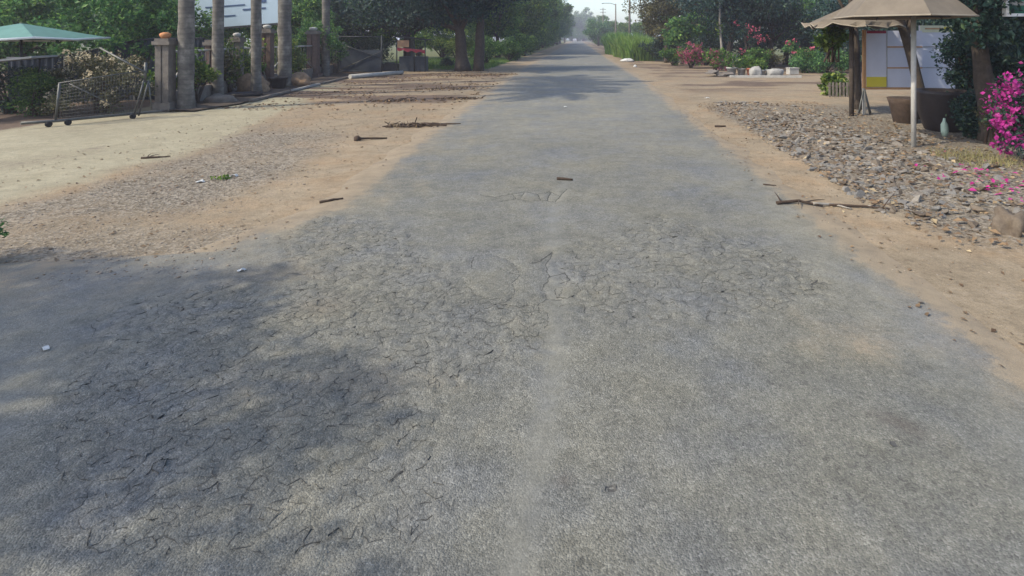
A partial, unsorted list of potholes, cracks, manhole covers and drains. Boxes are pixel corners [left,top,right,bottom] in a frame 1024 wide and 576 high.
crack [482,189,567,202]
crack [55,285,444,557]
crack [272,217,832,387]
